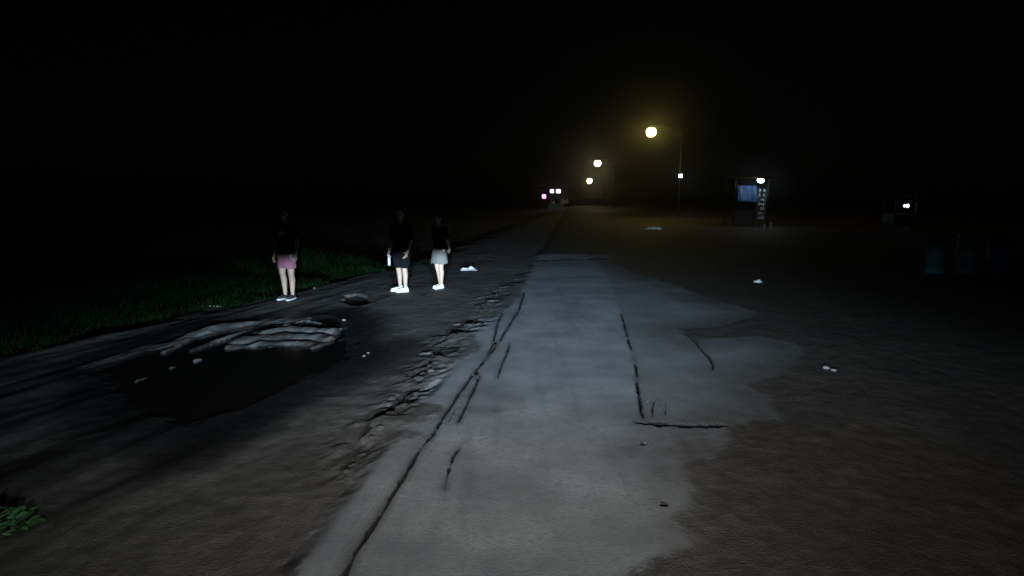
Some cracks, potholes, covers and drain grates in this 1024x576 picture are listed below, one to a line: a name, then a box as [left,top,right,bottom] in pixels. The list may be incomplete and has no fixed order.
crack [607,311,761,433]
crack [327,291,528,576]
pothole [58,313,383,443]
